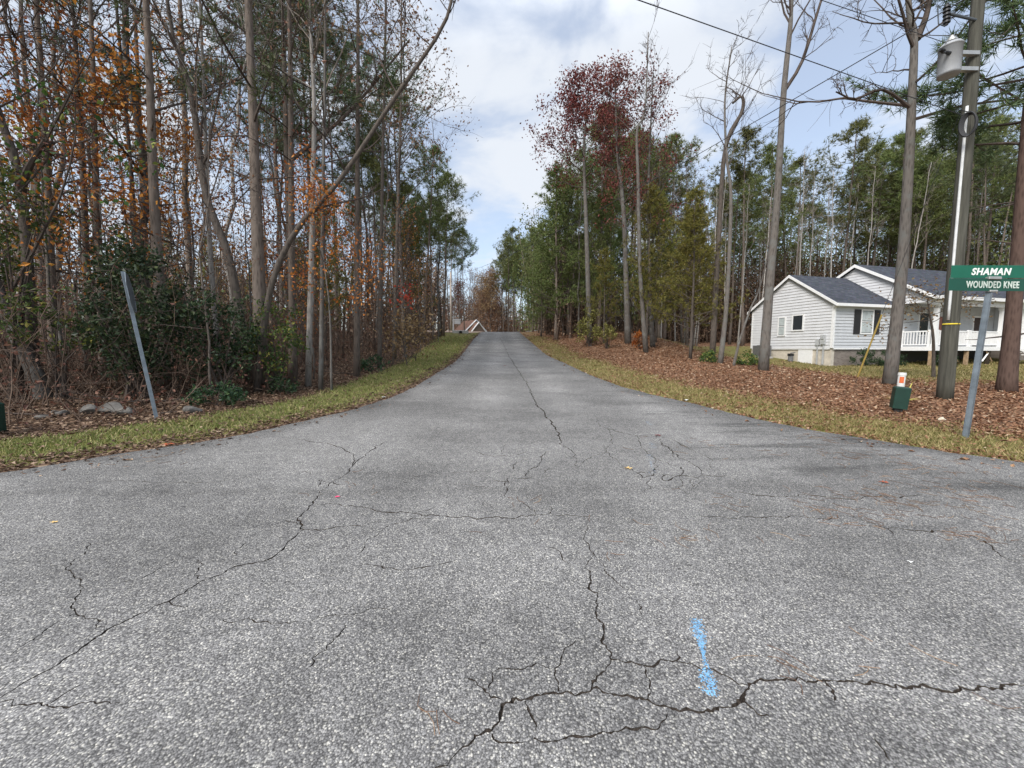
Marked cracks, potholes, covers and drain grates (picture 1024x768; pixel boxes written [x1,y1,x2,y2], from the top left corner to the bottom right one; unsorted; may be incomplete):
crack [0,438,1024,768]
crack [404,335,577,496]
